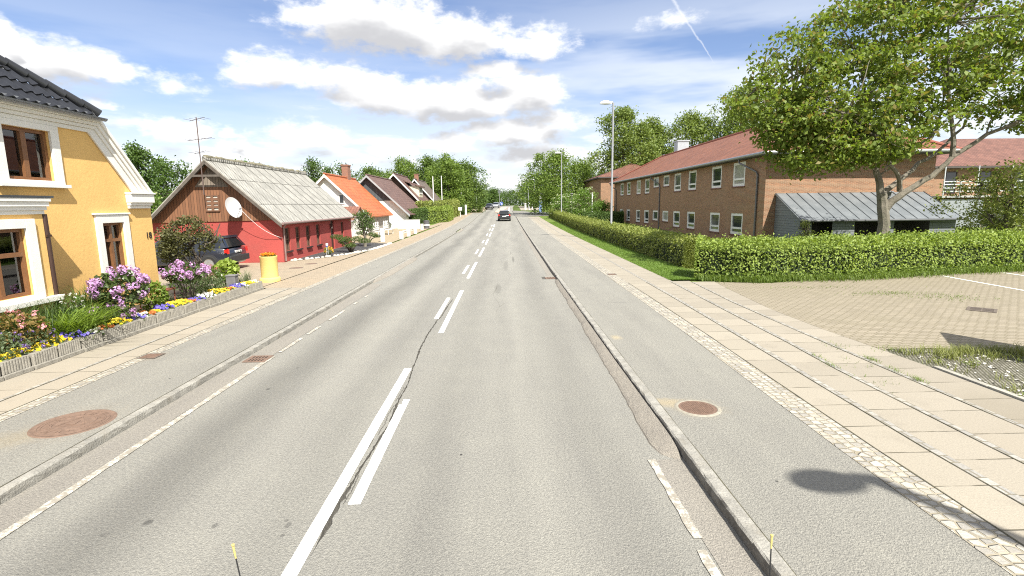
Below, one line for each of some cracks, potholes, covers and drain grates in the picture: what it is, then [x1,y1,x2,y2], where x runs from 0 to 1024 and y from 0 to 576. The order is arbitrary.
crack [311,300,452,555]
manhole cover [674,400,722,417]
manhole cover [27,409,118,438]
drain grate [242,355,274,363]
